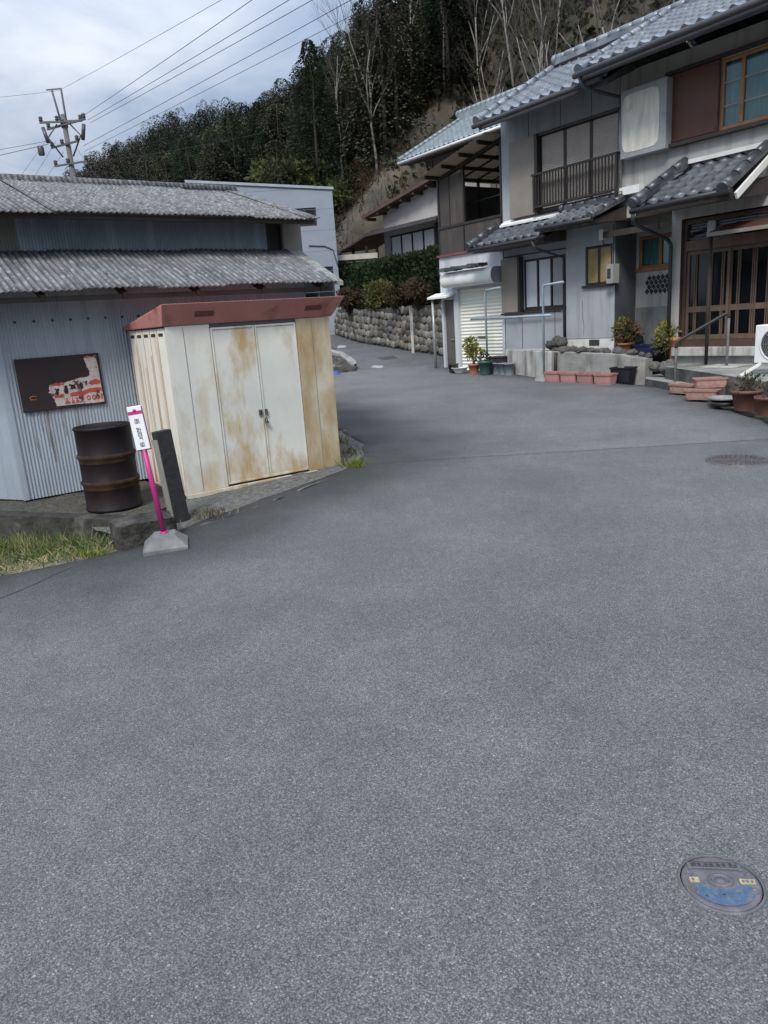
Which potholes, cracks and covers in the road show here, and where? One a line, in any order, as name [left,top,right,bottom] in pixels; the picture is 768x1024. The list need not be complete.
manhole cover [705,454,768,467]
manhole cover [677,854,767,916]
